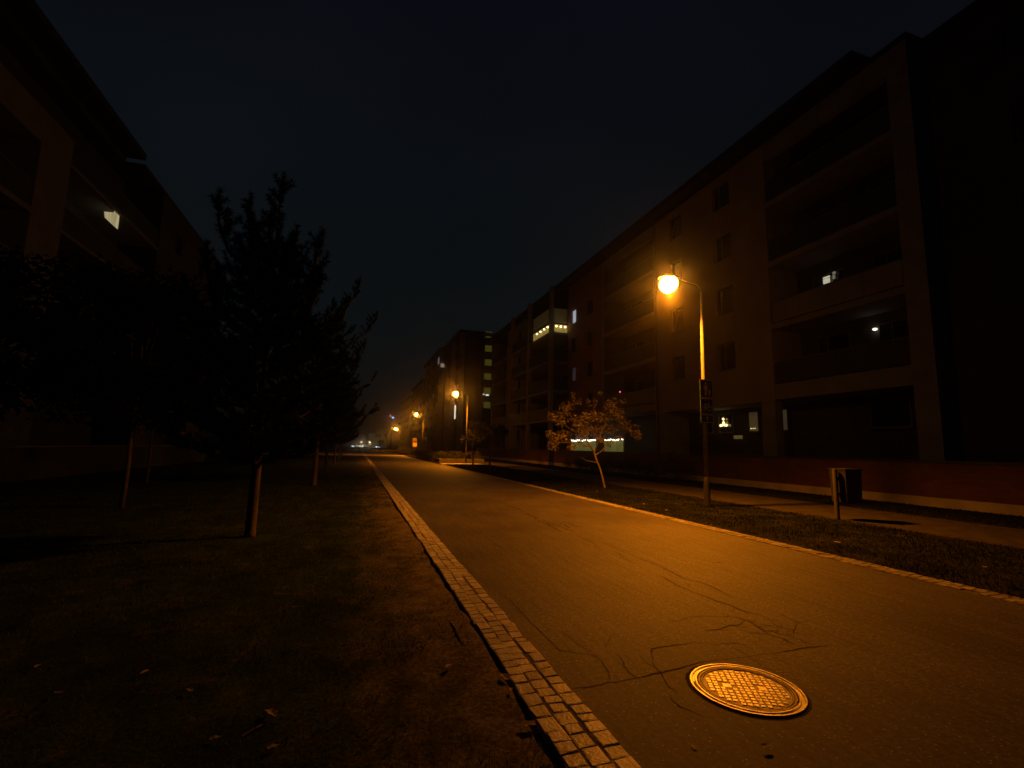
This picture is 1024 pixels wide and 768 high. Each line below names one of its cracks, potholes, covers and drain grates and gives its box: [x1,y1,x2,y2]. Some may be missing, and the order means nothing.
manhole cover [685,663,812,720]
crack [508,505,582,532]
crack [512,539,830,716]
